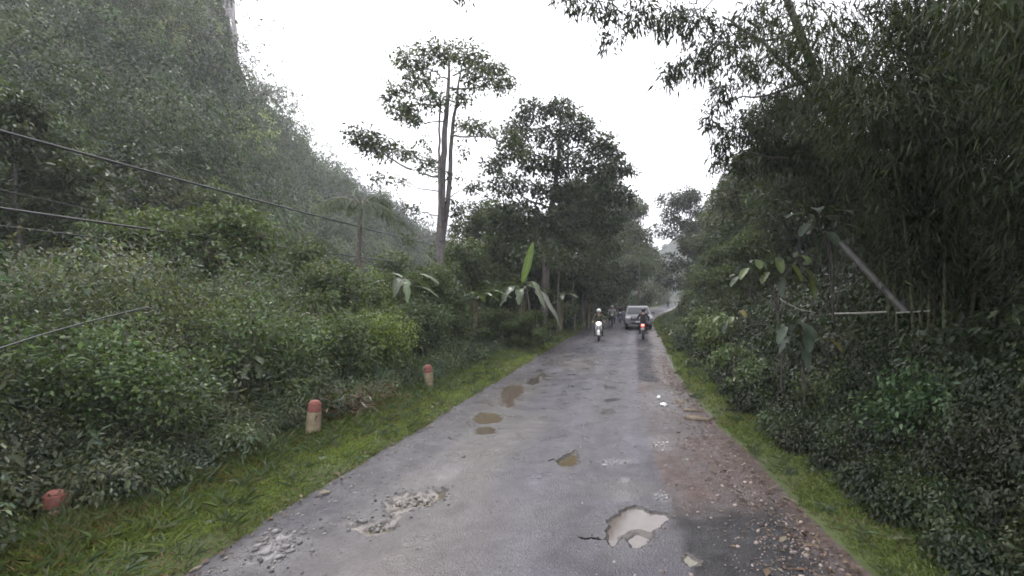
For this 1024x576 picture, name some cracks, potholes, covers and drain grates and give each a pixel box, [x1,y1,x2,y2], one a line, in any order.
pothole [472,412,504,424]
pothole [473,426,498,435]
pothole [680,552,704,568]
pothole [499,384,526,408]
pothole [604,505,672,548]
pothole [555,449,582,467]
pothole [345,487,450,538]
pothole [525,372,550,385]
